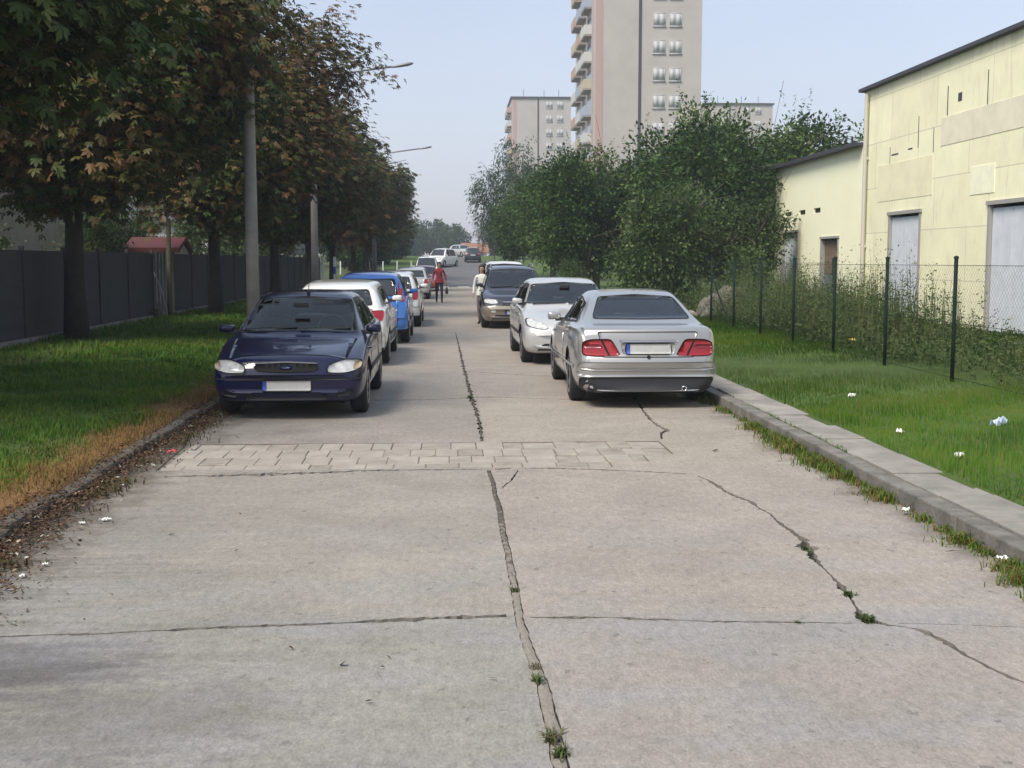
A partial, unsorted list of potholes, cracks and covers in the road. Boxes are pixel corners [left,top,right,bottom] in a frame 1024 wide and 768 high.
crack [0,468,1024,768]
crack [370,332,670,441]
